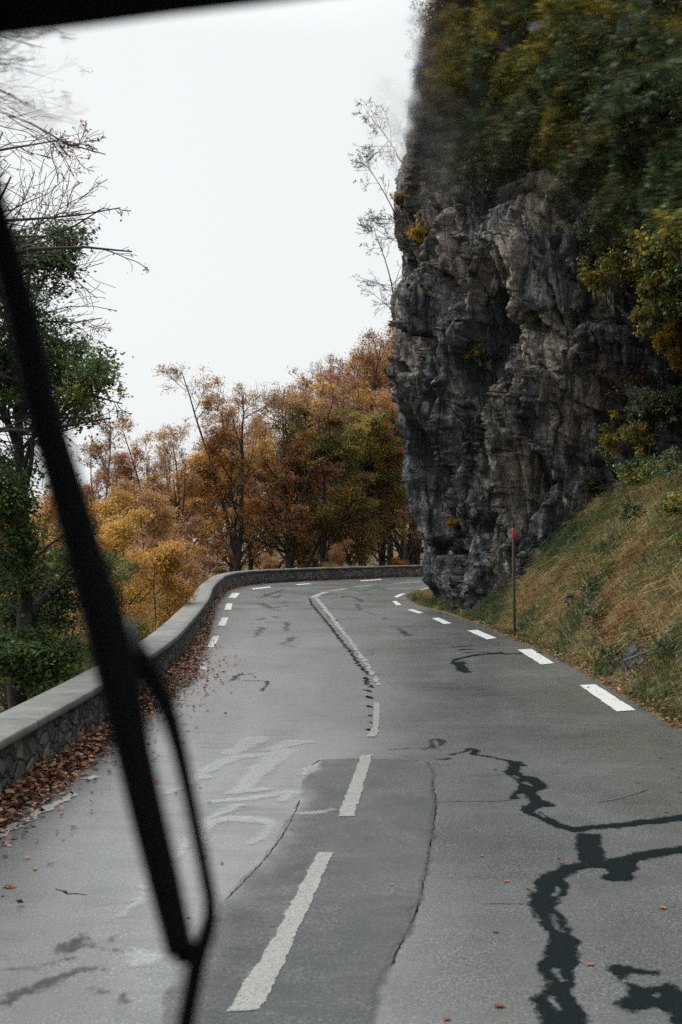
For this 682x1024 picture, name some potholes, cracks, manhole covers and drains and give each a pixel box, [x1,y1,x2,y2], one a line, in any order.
crack [231,673,269,691]
crack [253,589,296,643]
